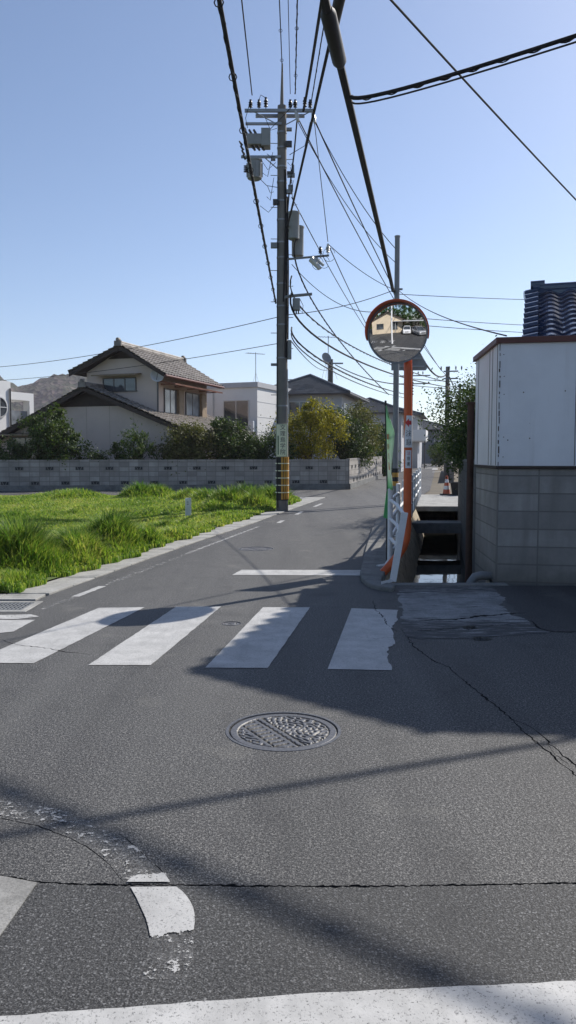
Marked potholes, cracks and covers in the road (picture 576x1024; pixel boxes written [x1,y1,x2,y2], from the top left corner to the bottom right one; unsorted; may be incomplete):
crack [405,613,576,776]
drain grate [0,601,43,612]
manhole cover [226,712,341,752]
crack [1,818,123,881]
